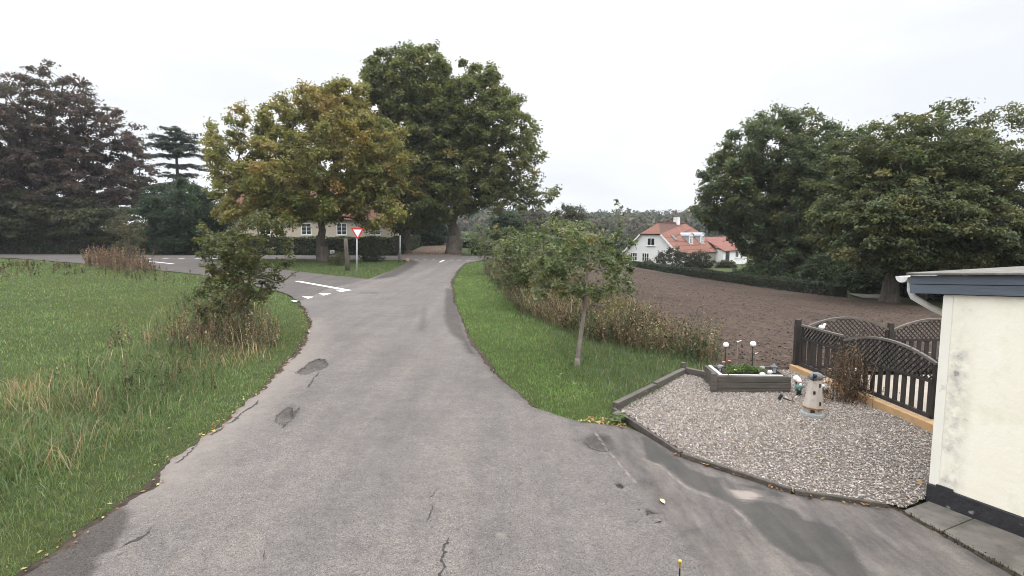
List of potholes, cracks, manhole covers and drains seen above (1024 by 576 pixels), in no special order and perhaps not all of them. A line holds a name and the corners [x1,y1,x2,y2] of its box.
crack [281,372,319,429]
crack [176,400,258,463]
pothole [295,358,332,375]
pothole [270,406,300,426]
crack [119,528,151,555]
crack [427,490,449,576]
